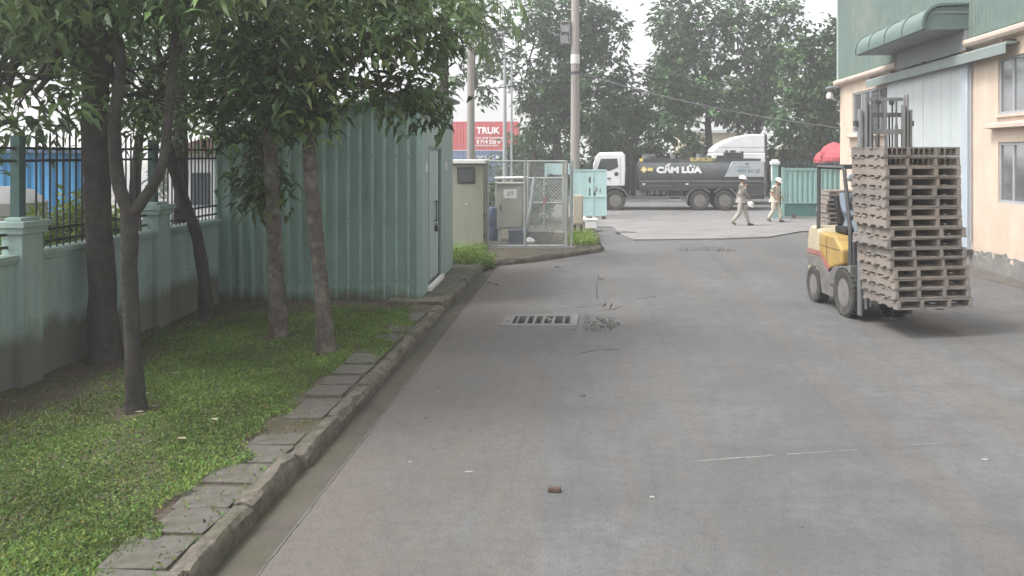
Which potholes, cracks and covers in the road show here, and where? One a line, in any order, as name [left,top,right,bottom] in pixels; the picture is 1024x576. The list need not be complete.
pothole [582,314,629,333]
crack [551,275,656,310]
drain grate [500,314,579,326]
